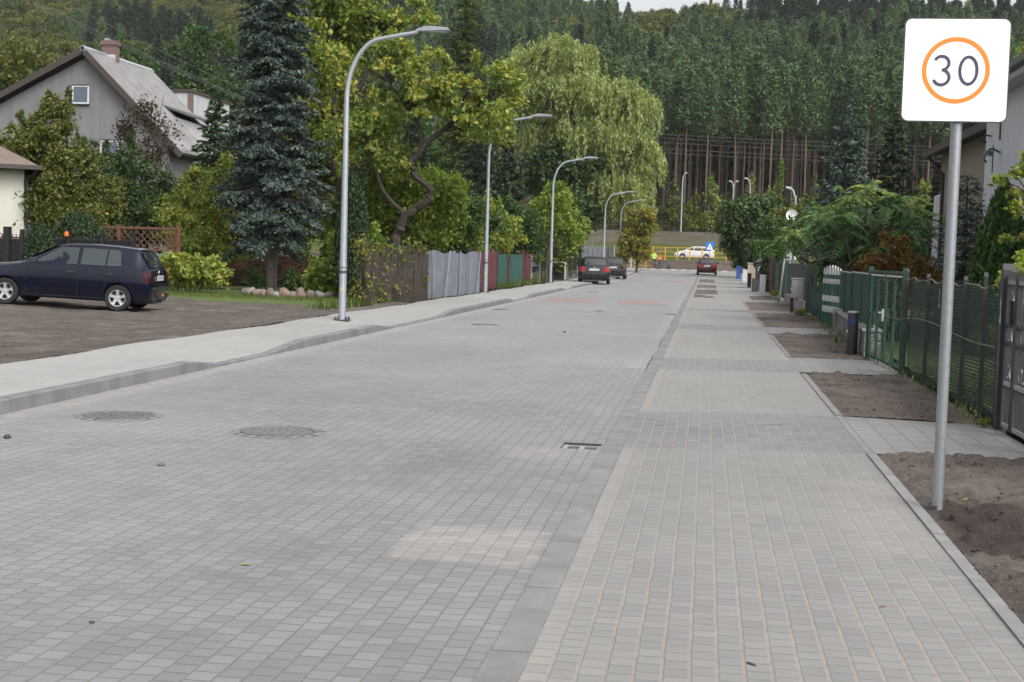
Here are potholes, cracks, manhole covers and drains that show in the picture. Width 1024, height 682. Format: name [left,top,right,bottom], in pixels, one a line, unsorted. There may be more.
manhole cover [231,426,327,438]
manhole cover [74,411,163,421]
drain grate [560,442,602,450]
